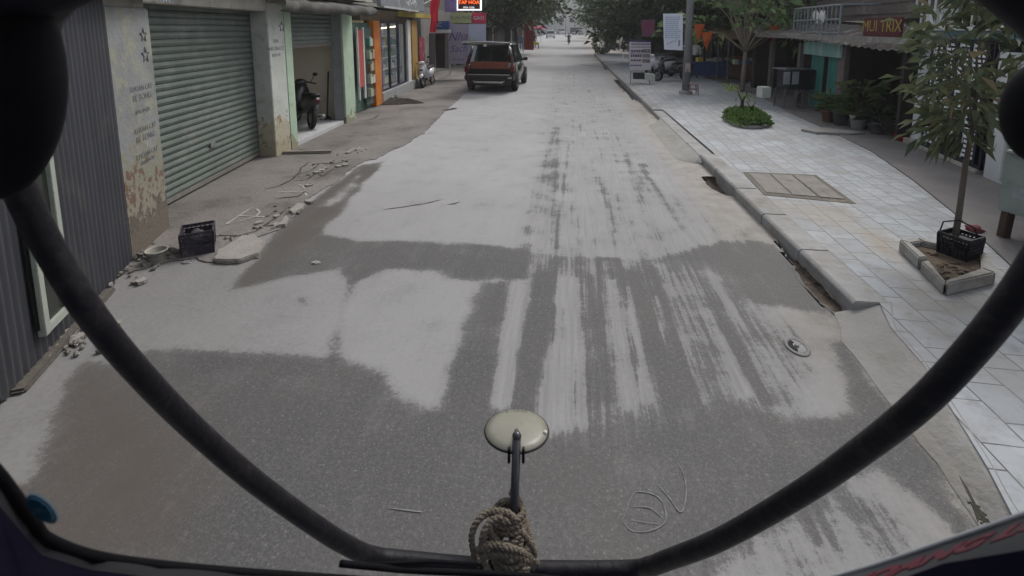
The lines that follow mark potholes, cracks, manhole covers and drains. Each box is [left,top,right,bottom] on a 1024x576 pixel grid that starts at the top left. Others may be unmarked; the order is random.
manhole cover [783,337,811,357]
manhole cover [743,172,856,204]
